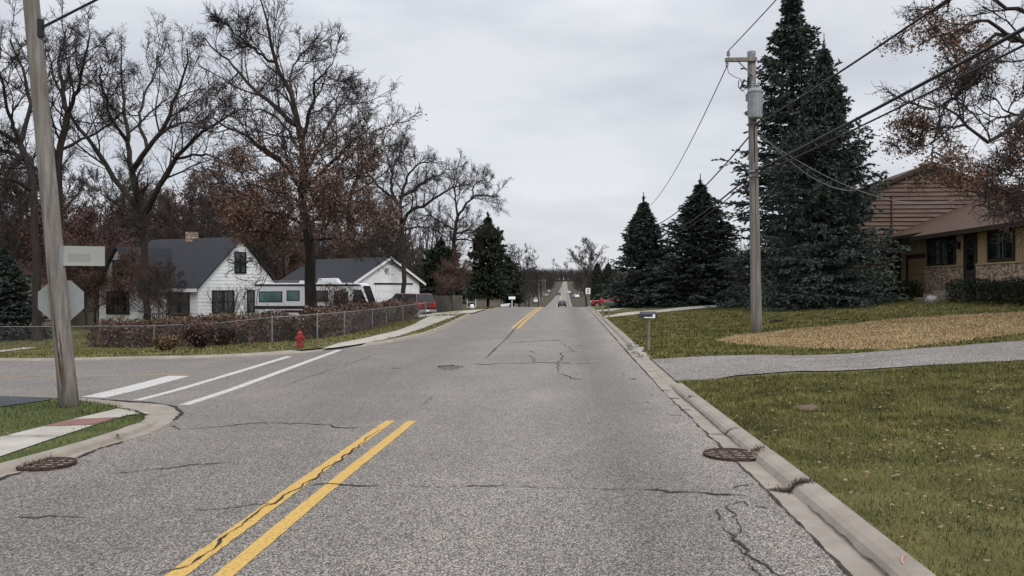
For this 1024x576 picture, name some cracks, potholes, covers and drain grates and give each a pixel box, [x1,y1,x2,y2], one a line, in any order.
crack [529,483,782,576]
crack [474,340,583,379]
